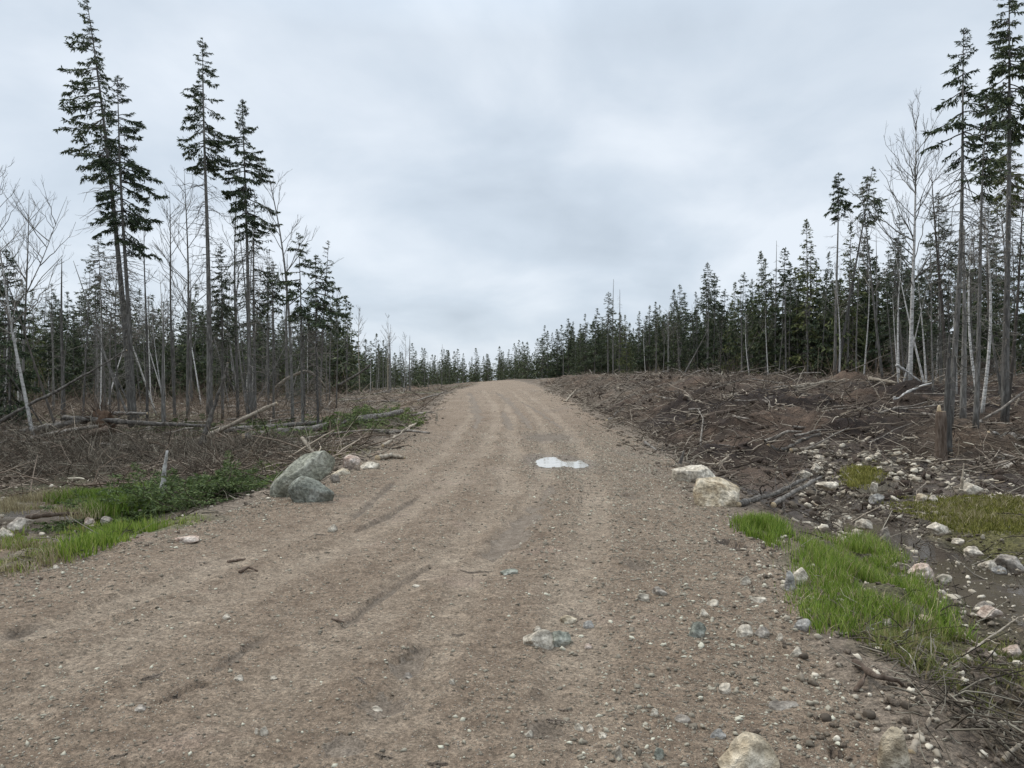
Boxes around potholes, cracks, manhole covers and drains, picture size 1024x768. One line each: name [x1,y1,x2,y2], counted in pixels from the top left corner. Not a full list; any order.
pothole [536,457,589,468]
